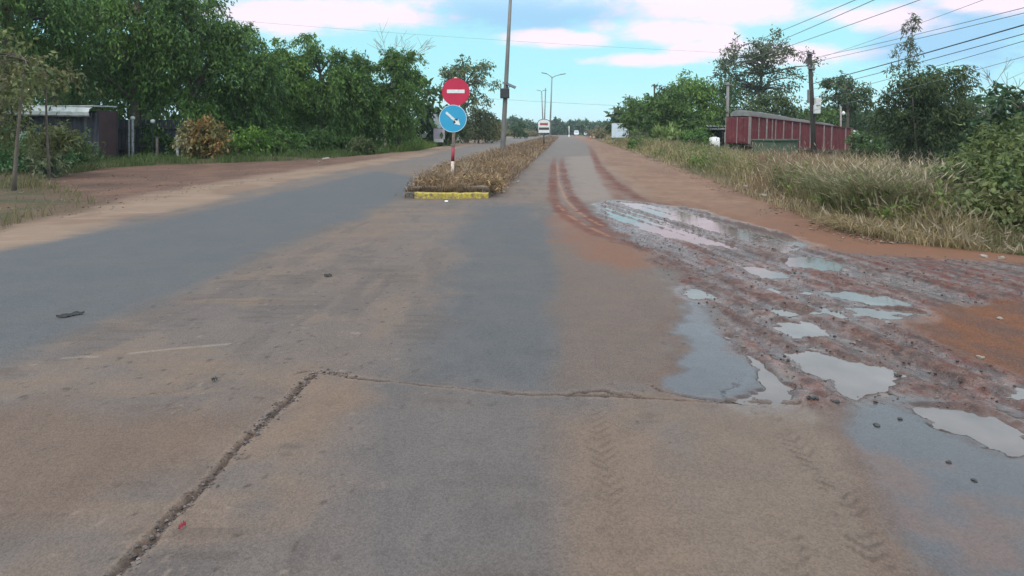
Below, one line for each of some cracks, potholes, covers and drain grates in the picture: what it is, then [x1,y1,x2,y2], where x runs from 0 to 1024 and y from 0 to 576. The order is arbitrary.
pothole [724,262,813,284]
pothole [818,286,927,310]
pothole [704,326,826,413]
pothole [739,298,942,325]
crack [102,369,808,576]
pothole [766,344,937,411]
pothole [756,312,849,344]
pothole [592,200,818,256]
pothole [856,390,1024,466]
